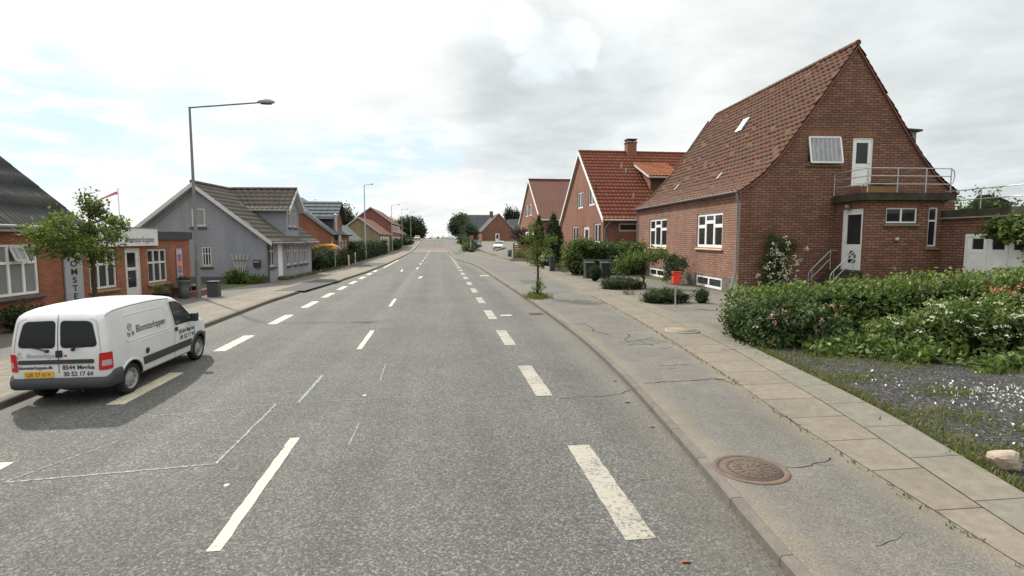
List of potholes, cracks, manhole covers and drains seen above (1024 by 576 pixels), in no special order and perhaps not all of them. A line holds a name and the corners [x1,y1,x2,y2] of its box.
manhole cover [712,455,791,485]
